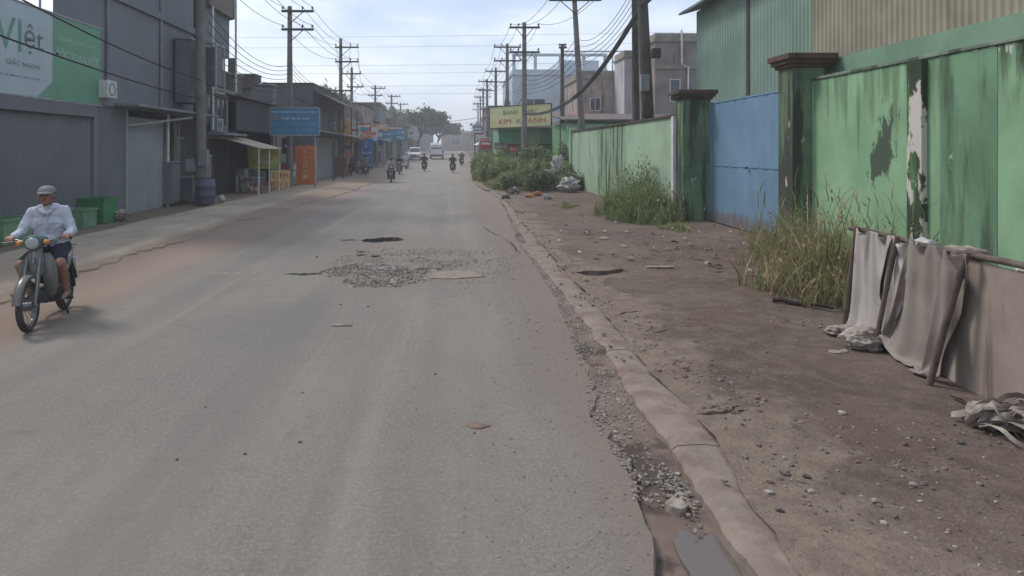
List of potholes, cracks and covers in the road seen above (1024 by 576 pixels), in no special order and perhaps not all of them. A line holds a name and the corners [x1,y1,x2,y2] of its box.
pothole [315,264,446,288]
